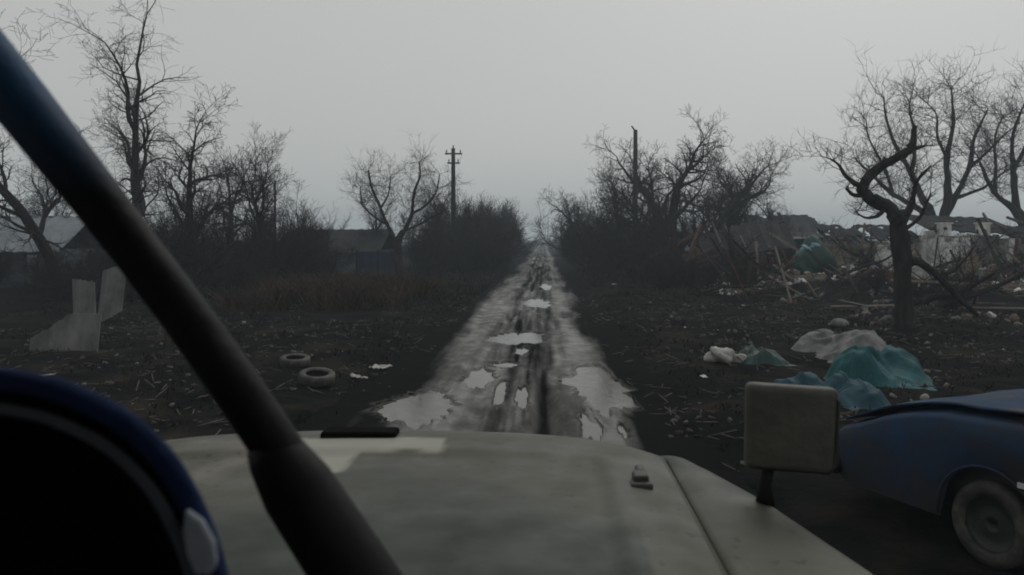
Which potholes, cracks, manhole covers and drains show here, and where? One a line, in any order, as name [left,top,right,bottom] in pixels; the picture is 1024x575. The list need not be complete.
pothole [513,382,530,412]
pothole [512,345,531,358]
pothole [492,376,509,410]
pothole [550,359,652,429]
pothole [358,383,469,431]
pothole [458,365,499,391]
pothole [475,330,555,348]
pothole [576,404,607,441]
pothole [537,282,555,291]
pothole [616,420,630,441]
pothole [511,297,558,310]
